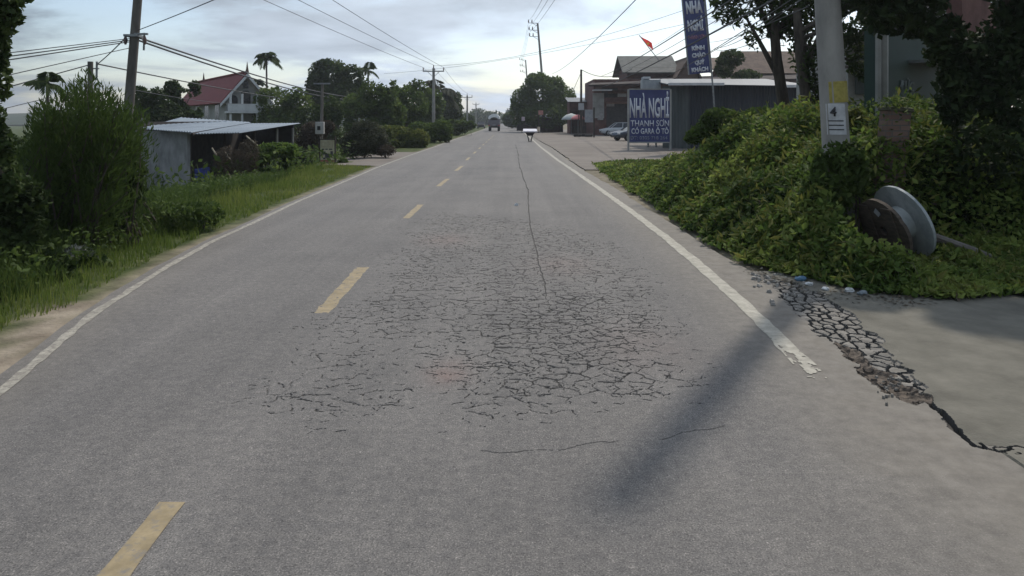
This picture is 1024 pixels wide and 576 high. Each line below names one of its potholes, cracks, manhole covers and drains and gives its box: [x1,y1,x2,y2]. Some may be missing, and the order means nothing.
crack [481,441,618,453]
crack [771,281,1022,454]
crack [244,147,714,434]
